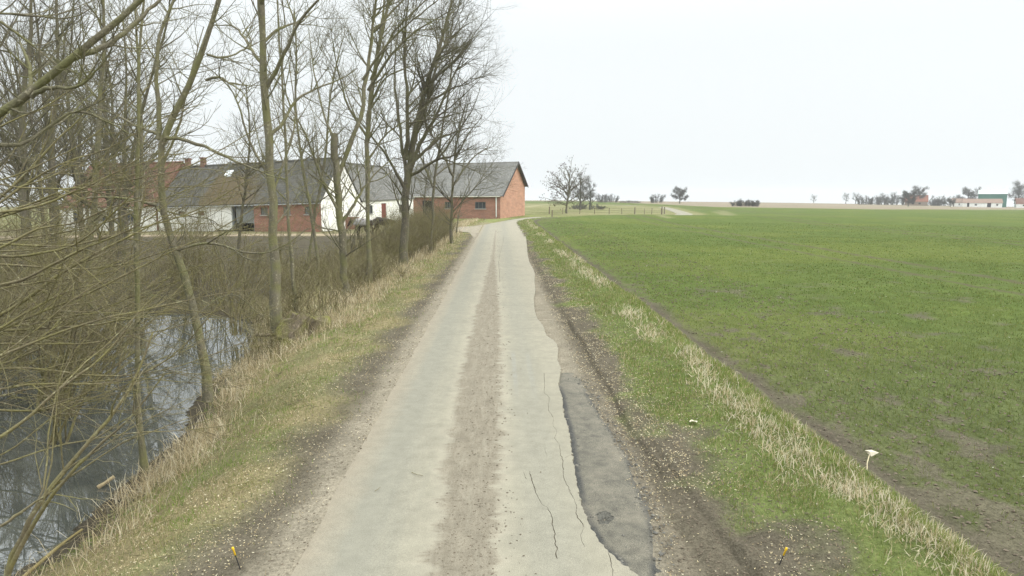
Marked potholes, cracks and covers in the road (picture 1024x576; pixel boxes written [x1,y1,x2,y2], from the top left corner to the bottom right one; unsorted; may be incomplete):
crack [524,473,558,558]
crack [544,375,584,545]
